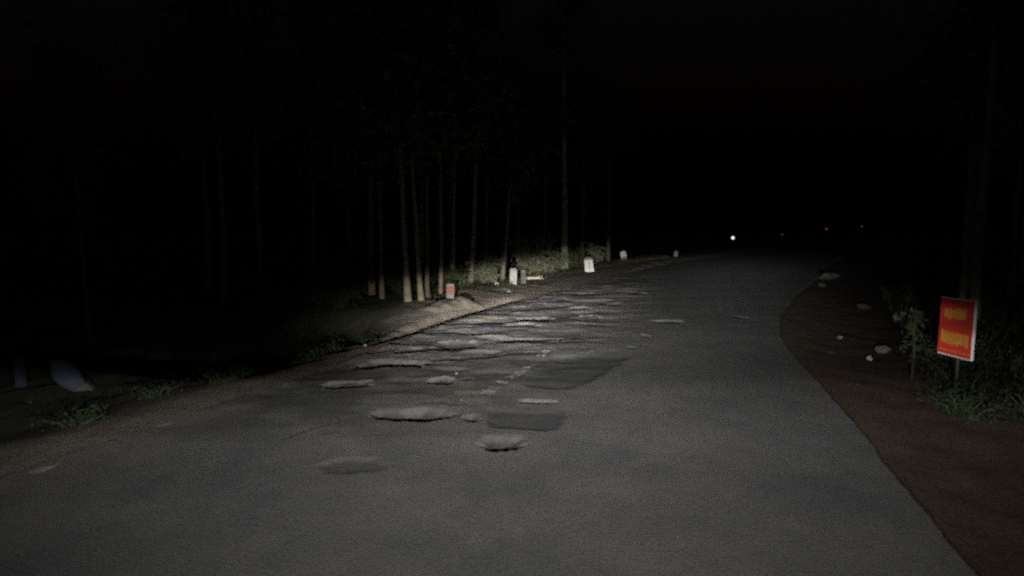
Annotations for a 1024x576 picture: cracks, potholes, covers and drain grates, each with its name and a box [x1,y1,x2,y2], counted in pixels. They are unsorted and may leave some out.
pothole [428,340,484,351]
pothole [365,406,464,422]
pothole [460,412,483,423]
pothole [474,434,529,453]
pothole [349,359,433,370]
pothole [320,379,376,389]
pothole [300,456,393,475]
pothole [425,376,457,385]
